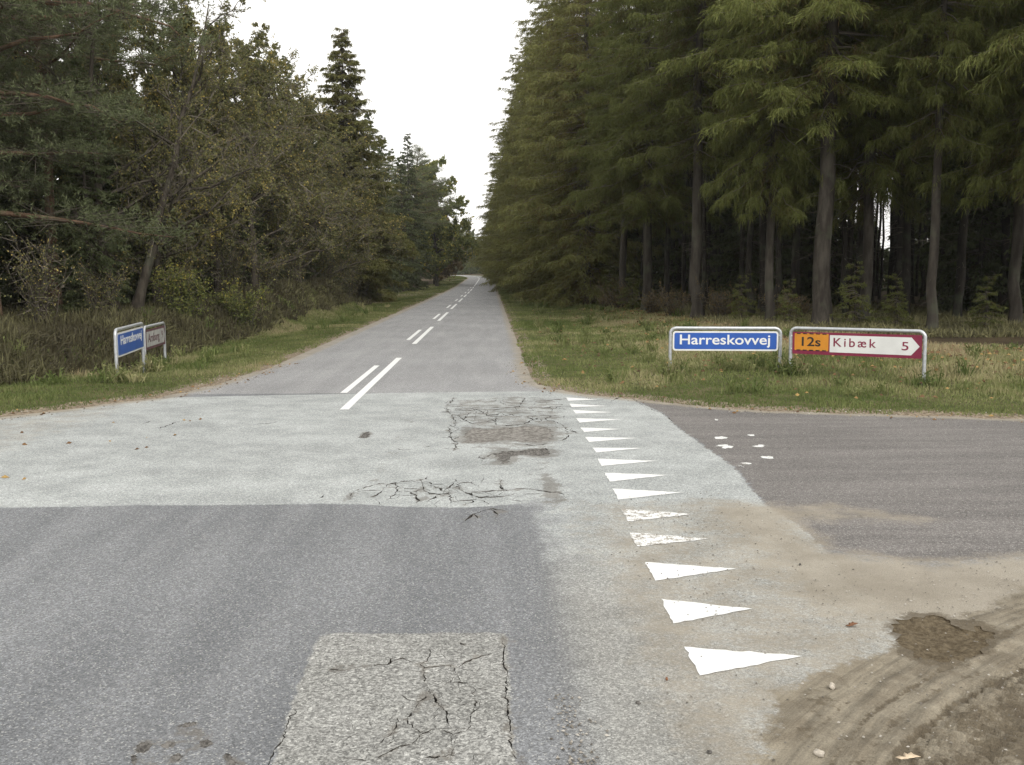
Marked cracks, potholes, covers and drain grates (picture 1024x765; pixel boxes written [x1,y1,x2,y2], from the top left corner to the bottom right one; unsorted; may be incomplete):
crack [427,397,579,450]
crack [330,640,502,765]
pothole [891,615,995,662]
crack [350,478,563,521]
